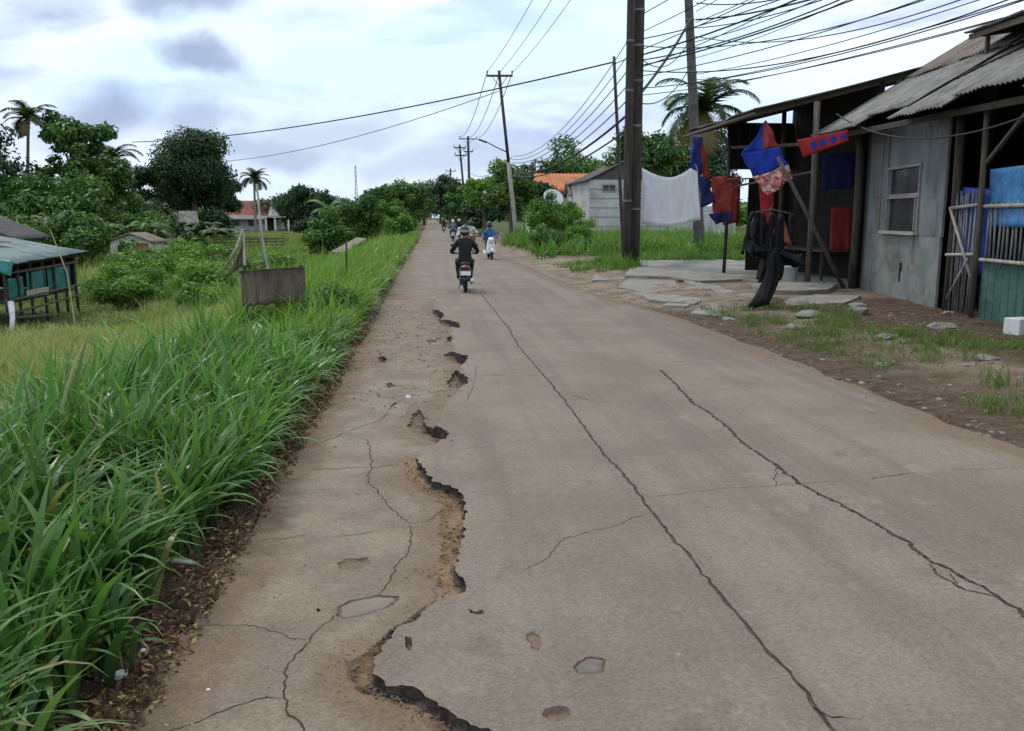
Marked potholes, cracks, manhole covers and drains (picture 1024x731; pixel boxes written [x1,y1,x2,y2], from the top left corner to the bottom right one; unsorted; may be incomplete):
pothole [444,351,468,365]
crack [481,294,1024,731]
pothole [407,410,449,443]
pothole [526,632,542,651]
pothole [542,706,571,722]
crack [169,365,492,731]
pothole [446,370,469,388]
pothole [439,319,460,328]
pothole [337,557,371,570]
